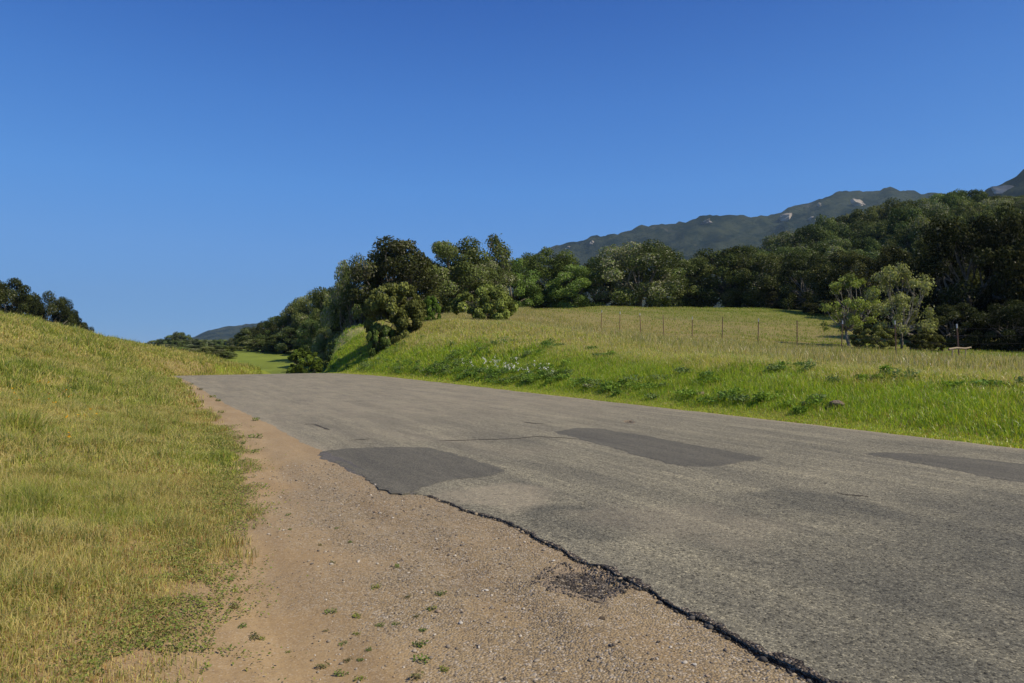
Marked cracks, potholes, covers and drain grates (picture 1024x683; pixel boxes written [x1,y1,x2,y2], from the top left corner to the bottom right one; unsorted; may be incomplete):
crack [442,422,575,441]
